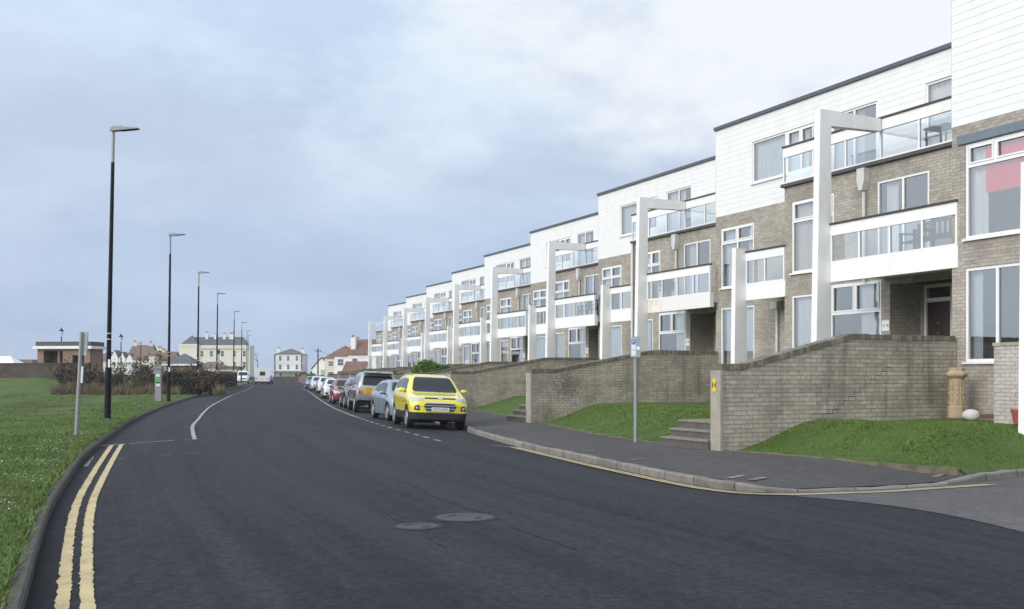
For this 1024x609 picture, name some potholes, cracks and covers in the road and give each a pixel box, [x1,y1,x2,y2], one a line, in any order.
crack [386,476,583,551]
manhole cover [390,522,444,530]
manhole cover [431,513,499,522]
